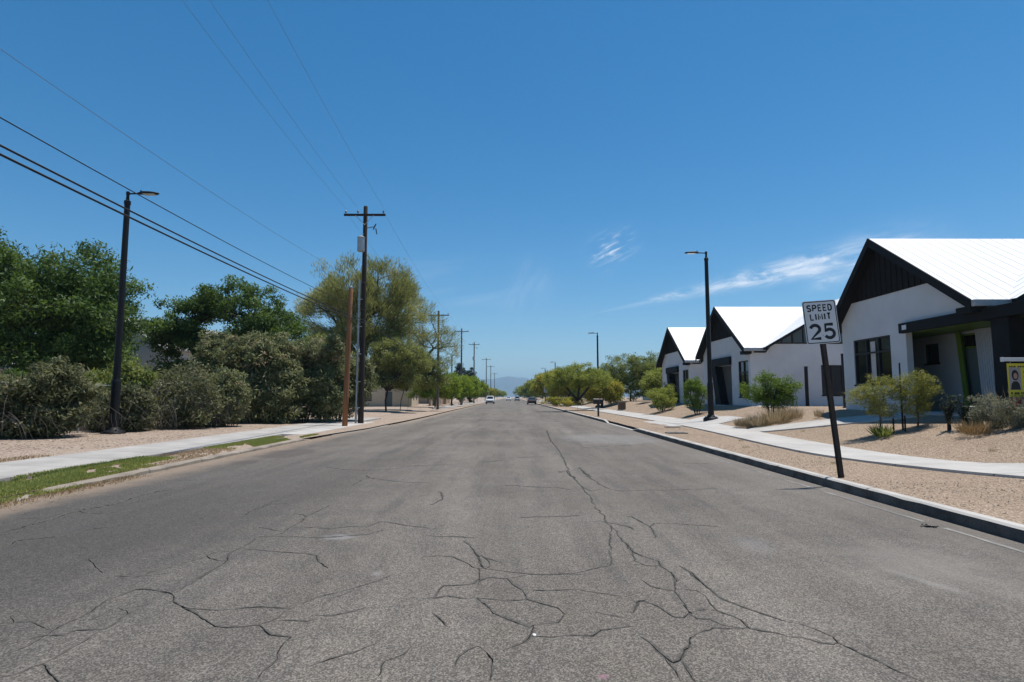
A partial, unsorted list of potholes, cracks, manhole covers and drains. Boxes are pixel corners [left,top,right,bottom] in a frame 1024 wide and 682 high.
crack [0,430,924,682]
